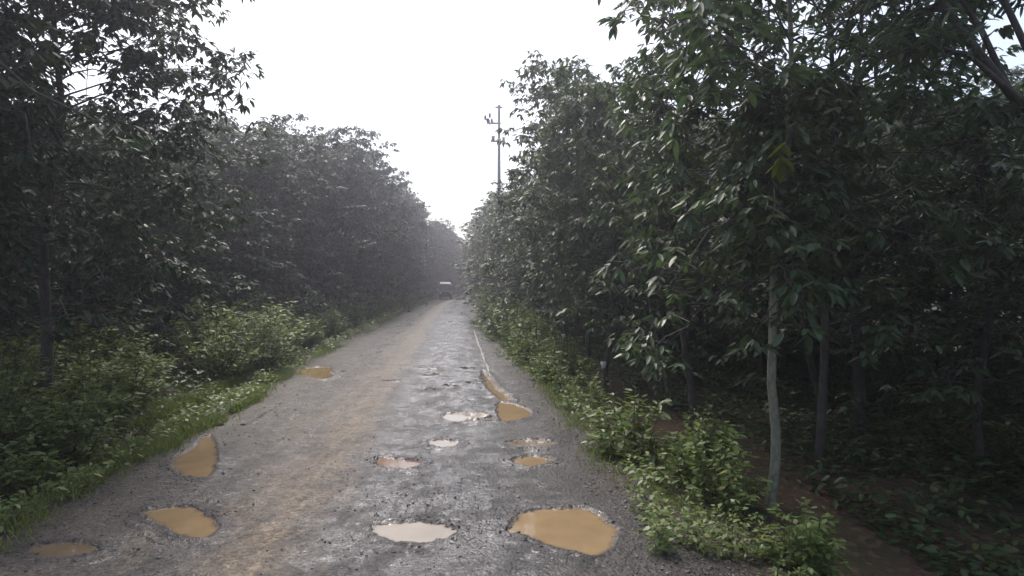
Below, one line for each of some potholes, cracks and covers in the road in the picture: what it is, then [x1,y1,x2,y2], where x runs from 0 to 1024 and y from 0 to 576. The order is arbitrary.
pothole [417,436,471,450]
pothole [501,453,564,471]
pothole [157,433,231,482]
pothole [486,500,642,569]
pothole [433,411,495,424]
pothole [292,365,341,380]
pothole [118,499,242,549]
pothole [489,401,539,424]
pothole [349,512,483,554]
pothole [495,437,566,452]
pothole [364,453,433,474]
pothole [0,531,125,570]
